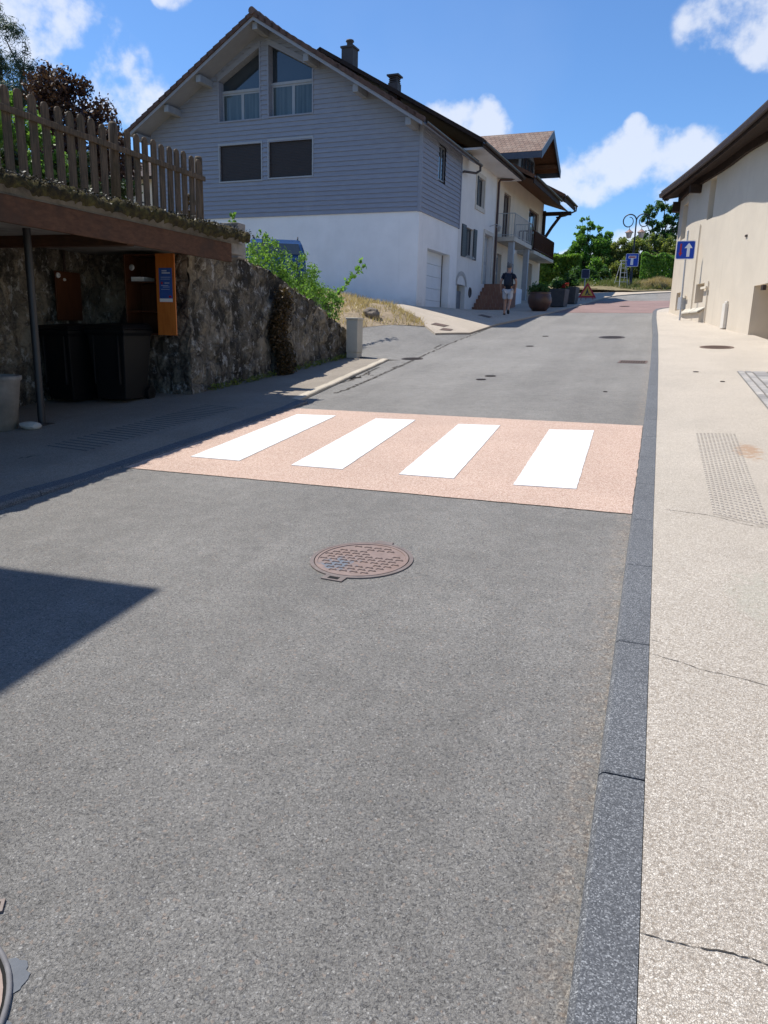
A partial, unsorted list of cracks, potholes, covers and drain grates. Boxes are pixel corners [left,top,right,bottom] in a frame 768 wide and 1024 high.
manhole cover [310,541,413,582]
manhole cover [0,898,30,1024]
